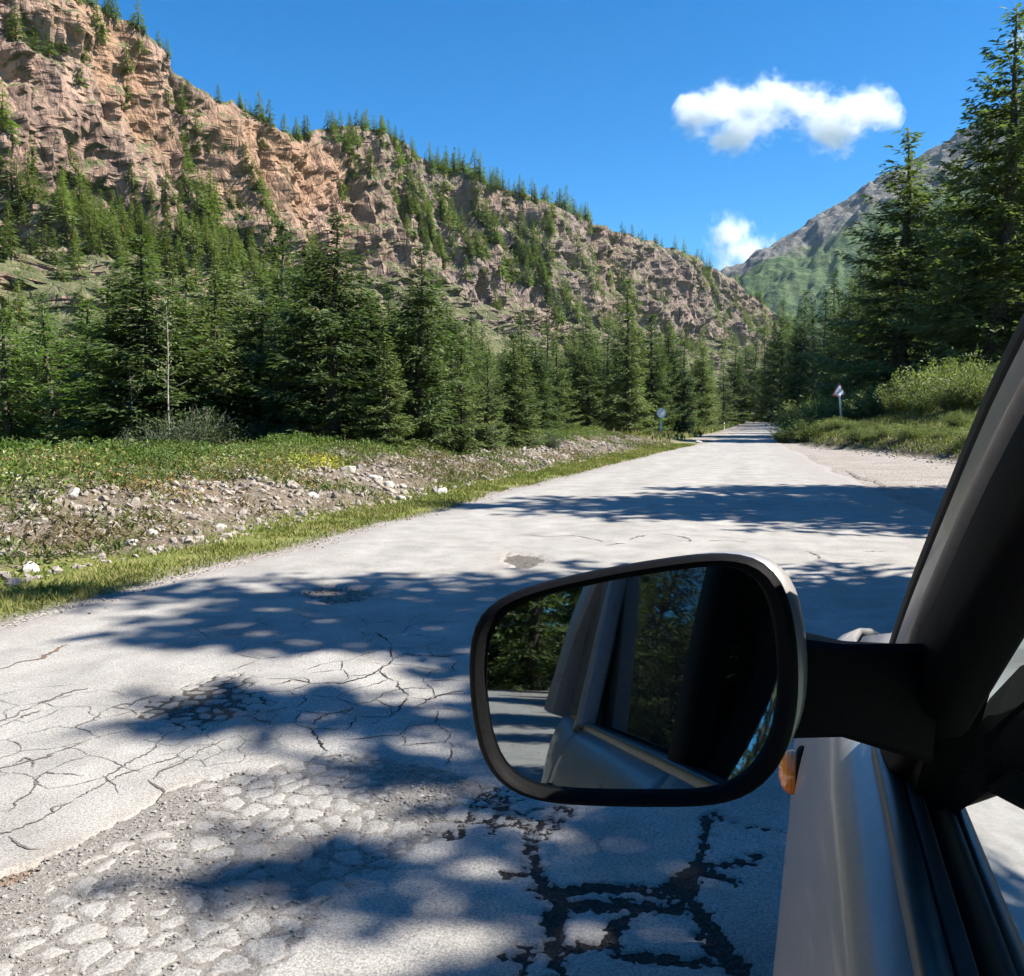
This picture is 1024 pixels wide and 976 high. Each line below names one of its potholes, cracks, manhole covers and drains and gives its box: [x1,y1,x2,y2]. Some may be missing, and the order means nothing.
crack [0,613,782,976]
pothole [129,674,276,734]
pothole [303,587,376,605]
pothole [504,554,545,569]
